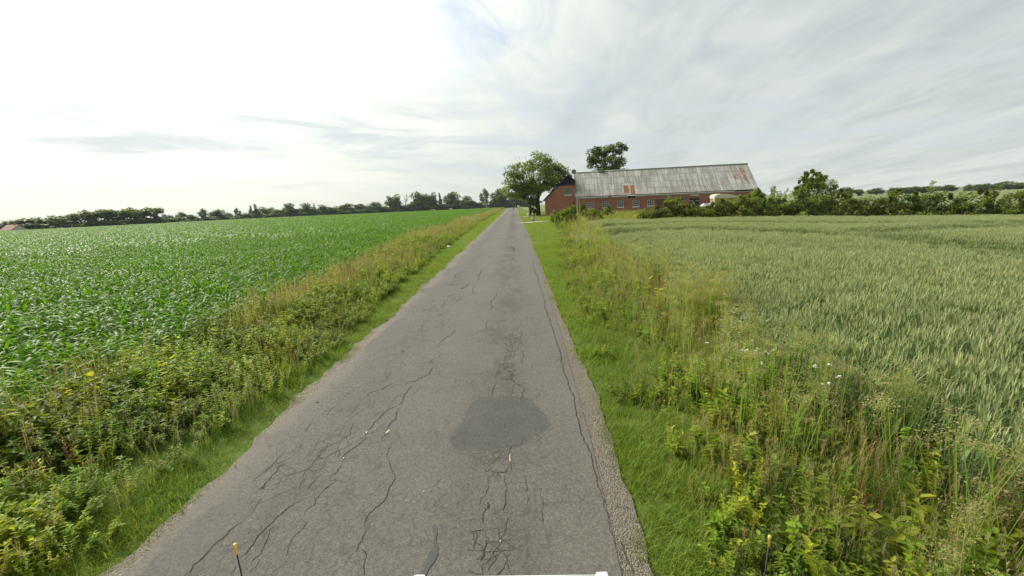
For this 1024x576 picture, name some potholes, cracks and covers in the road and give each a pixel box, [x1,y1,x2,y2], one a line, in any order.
crack [189,214,532,574]
crack [468,436,551,576]
